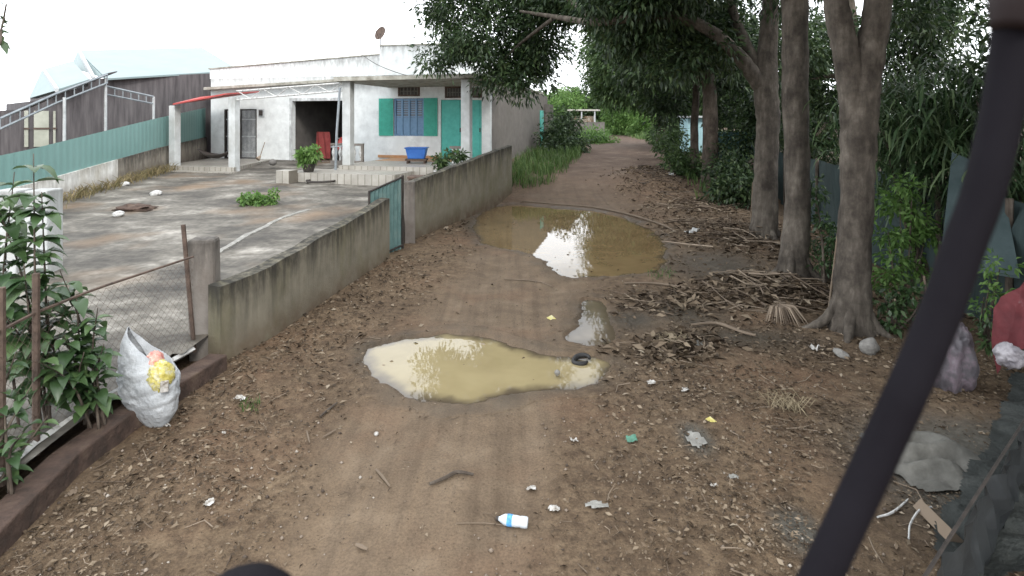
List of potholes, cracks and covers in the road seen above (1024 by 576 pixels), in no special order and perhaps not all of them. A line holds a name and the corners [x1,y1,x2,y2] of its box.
pothole [462,202,679,281]
pothole [544,292,636,352]
pothole [339,324,636,420]
